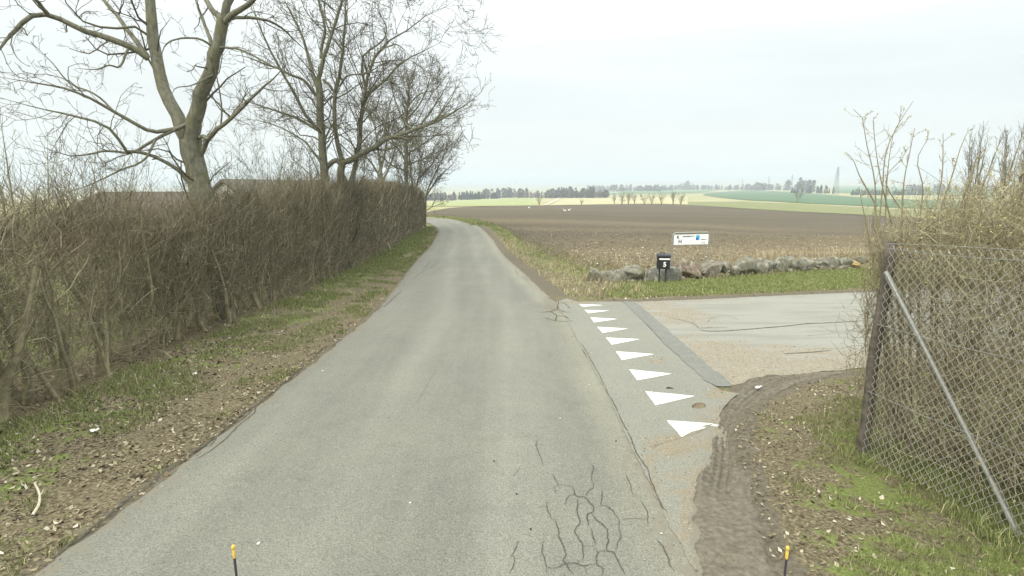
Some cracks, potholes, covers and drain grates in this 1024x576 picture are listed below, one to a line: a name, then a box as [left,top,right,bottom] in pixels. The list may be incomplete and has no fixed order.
crack [541,346,668,575]
